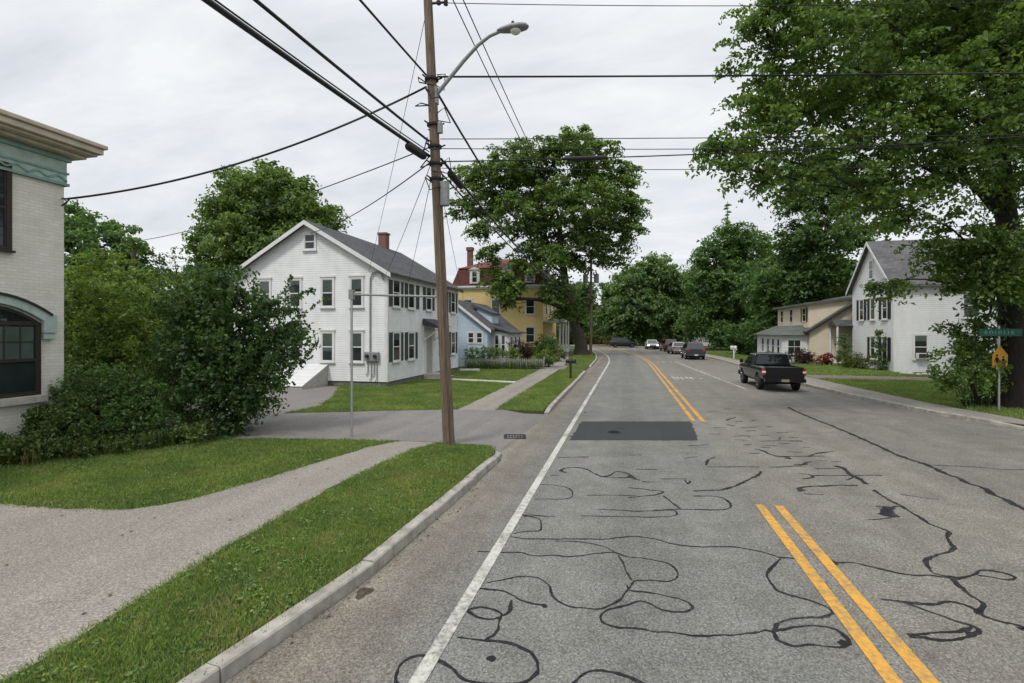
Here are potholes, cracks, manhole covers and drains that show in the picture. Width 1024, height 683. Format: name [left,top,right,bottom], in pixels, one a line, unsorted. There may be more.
crack [514,444,762,534]
crack [796,466,883,495]
